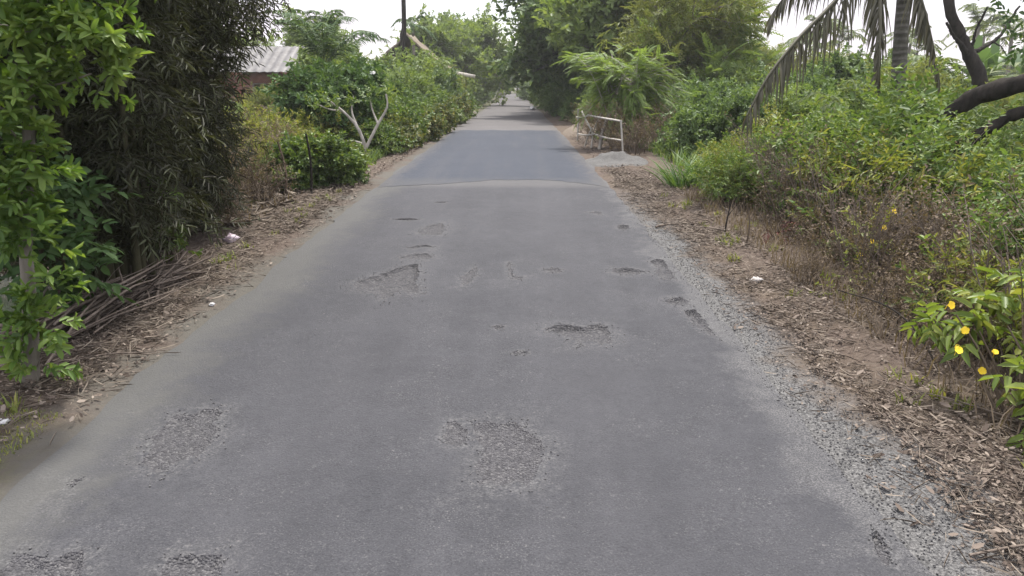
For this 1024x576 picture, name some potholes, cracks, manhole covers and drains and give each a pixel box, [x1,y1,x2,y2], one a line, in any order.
pothole [685,309,715,336]
pothole [0,550,86,576]
pothole [141,408,224,473]
pothole [353,264,421,299]
pothole [544,324,613,347]
pothole [460,268,477,284]
pothole [650,259,674,281]
pothole [665,297,690,305]
pothole [417,223,445,235]
